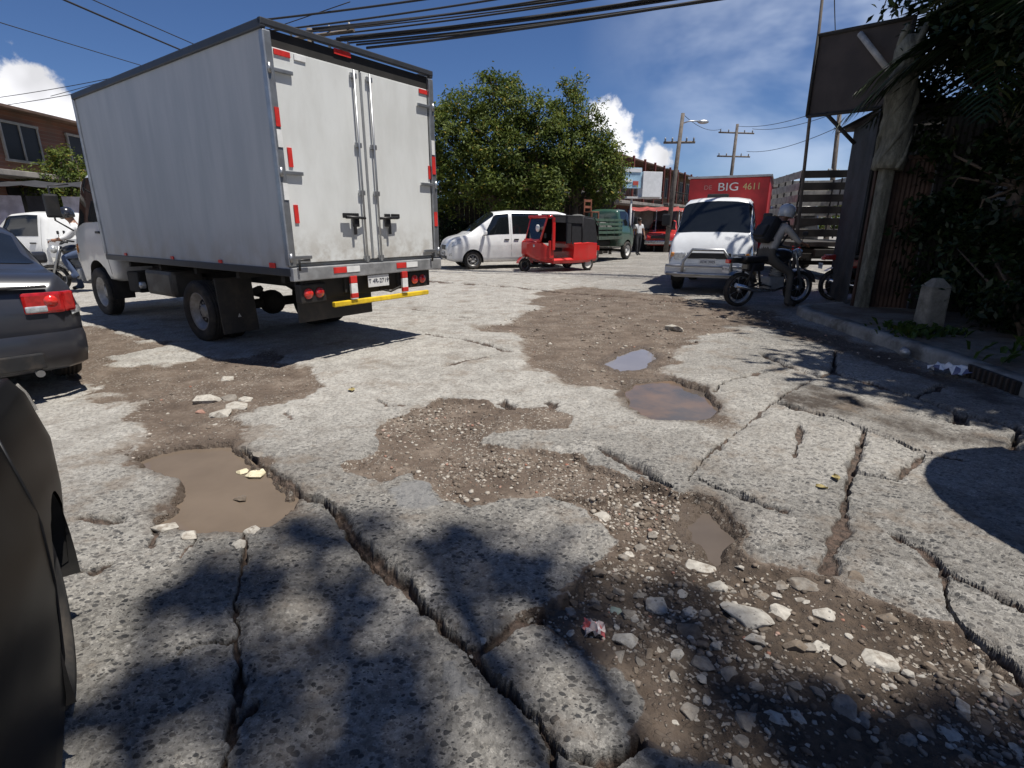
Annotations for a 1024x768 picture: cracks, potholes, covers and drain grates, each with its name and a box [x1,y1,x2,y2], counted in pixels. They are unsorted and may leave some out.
crack [146,526,261,768]
drain grate [966,364,1022,395]
pothole [618,374,725,422]
pothole [128,439,304,535]
pothole [597,345,663,373]
pothole [343,396,634,515]
crack [241,445,674,768]
crack [696,477,792,515]
pothole [515,476,1024,768]
crack [711,350,1024,689]
